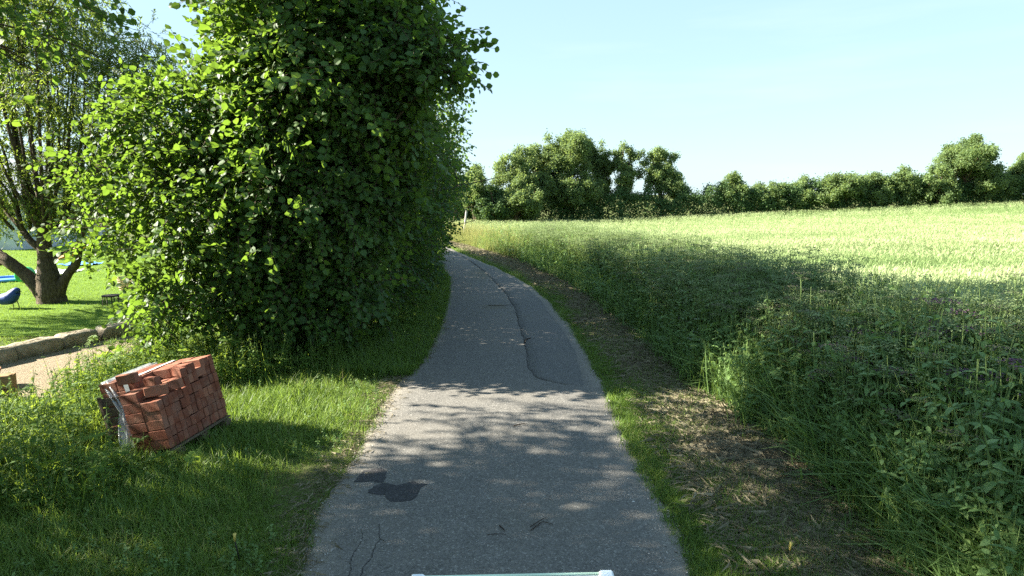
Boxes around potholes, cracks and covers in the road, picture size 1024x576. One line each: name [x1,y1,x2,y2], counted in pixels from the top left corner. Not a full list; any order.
crack [348,529,382,576]
